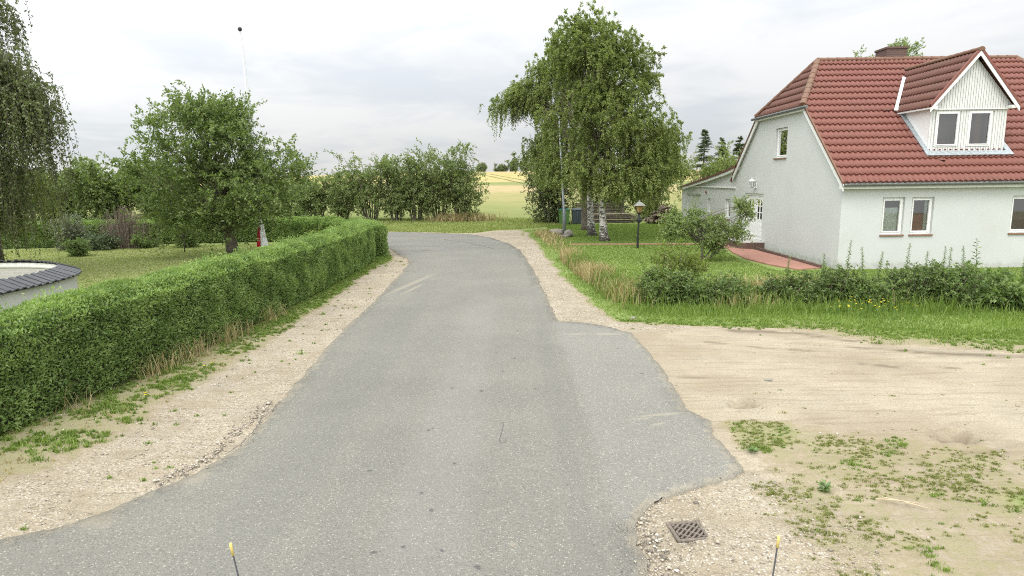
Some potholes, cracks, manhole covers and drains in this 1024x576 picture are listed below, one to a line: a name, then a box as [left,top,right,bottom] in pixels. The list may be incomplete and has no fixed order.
drain grate [666,520,708,543]
